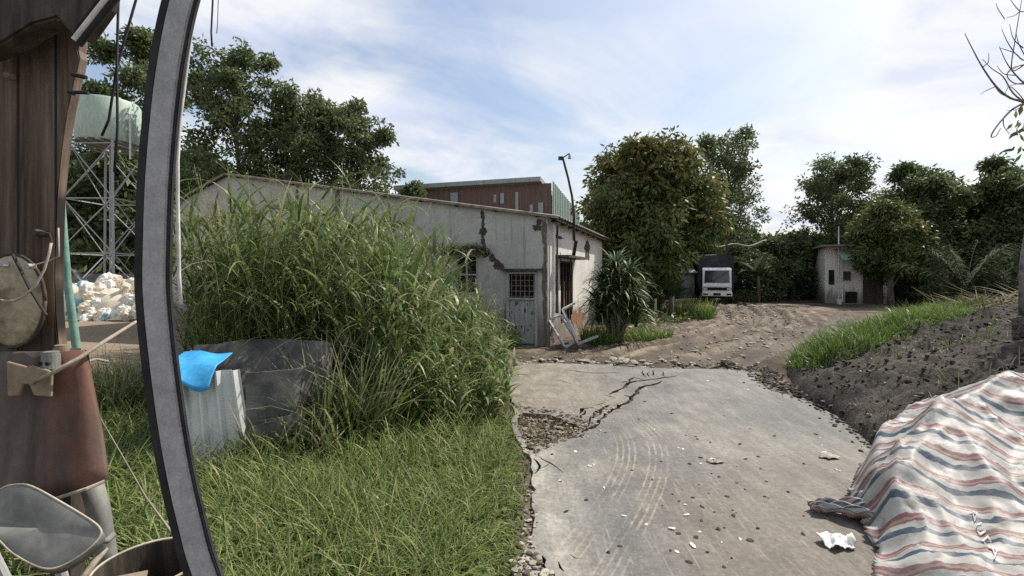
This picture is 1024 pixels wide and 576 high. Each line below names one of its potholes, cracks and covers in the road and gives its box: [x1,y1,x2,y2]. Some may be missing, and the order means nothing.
crack [563,370,675,432]
pothole [517,413,580,444]
